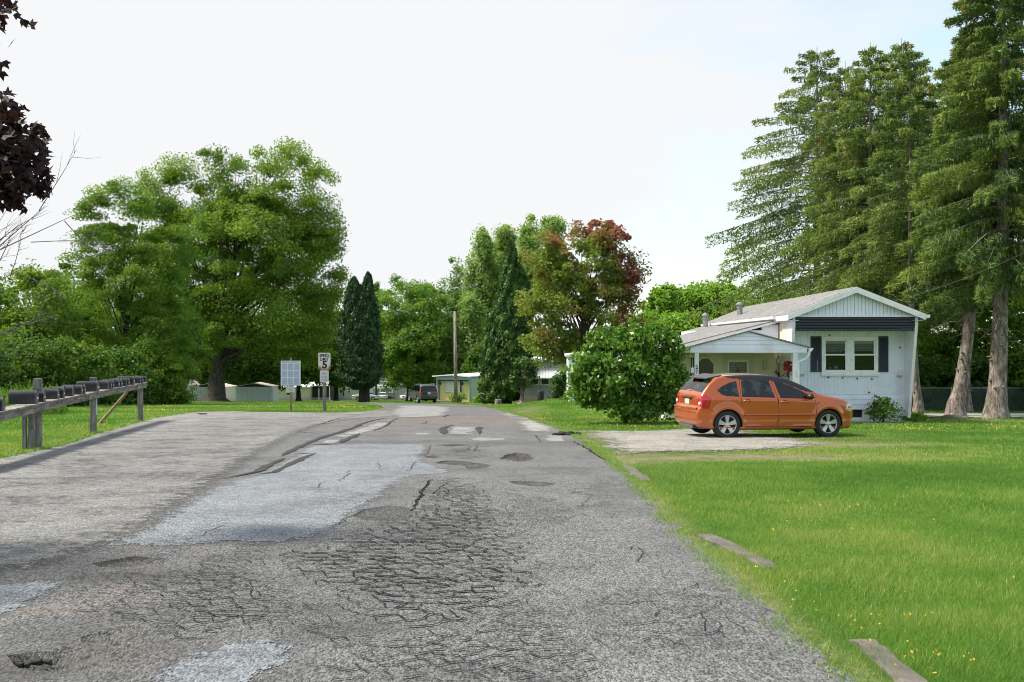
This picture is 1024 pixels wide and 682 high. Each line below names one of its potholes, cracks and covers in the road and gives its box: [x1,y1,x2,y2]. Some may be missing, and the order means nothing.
pothole [500,453,534,462]
crack [279,478,619,626]
crack [323,608,609,682]
pothole [7,624,143,673]
pothole [436,461,490,469]
pothole [92,556,169,567]
